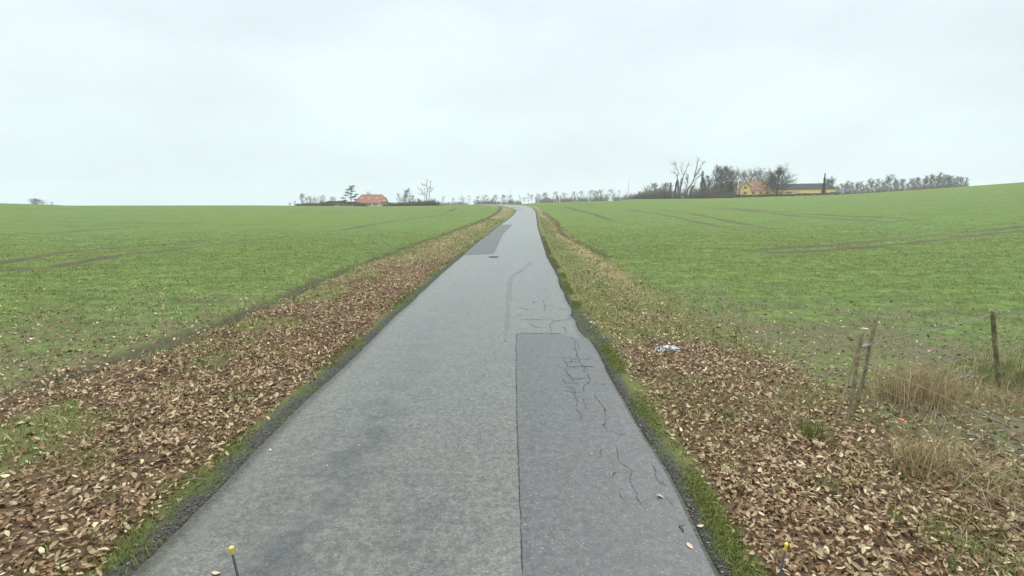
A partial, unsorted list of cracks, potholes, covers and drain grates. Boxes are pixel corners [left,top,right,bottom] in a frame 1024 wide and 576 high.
crack [518,301,641,503]
